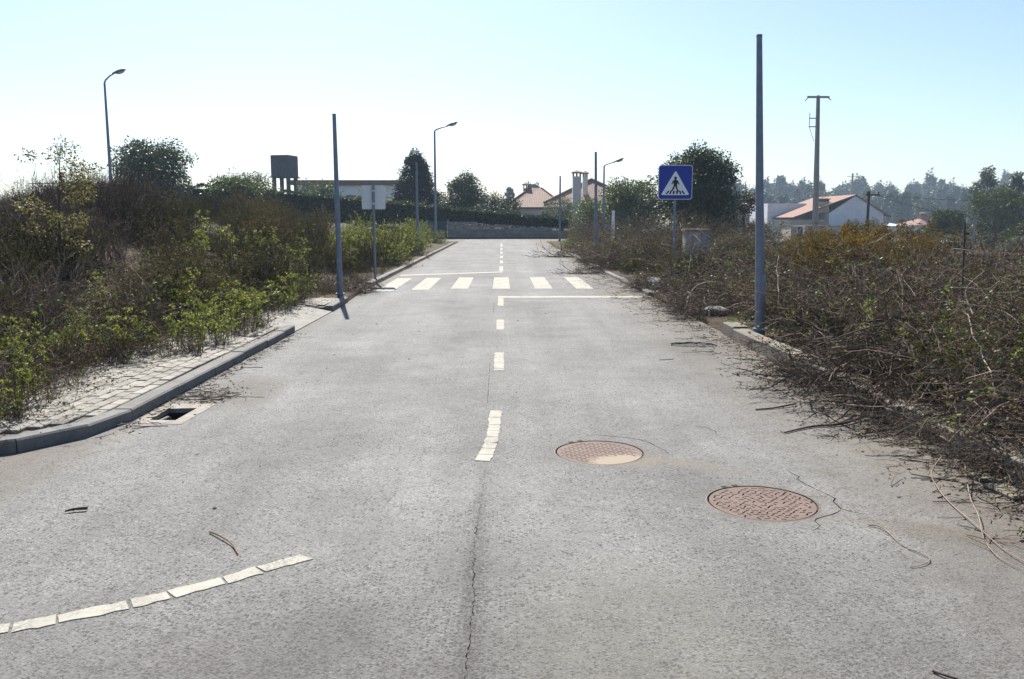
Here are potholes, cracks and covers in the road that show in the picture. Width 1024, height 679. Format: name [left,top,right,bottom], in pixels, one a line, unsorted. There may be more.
manhole cover [554,440,646,465]
drain grate [133,404,216,424]
manhole cover [705,484,821,522]
crack [790,472,856,530]
